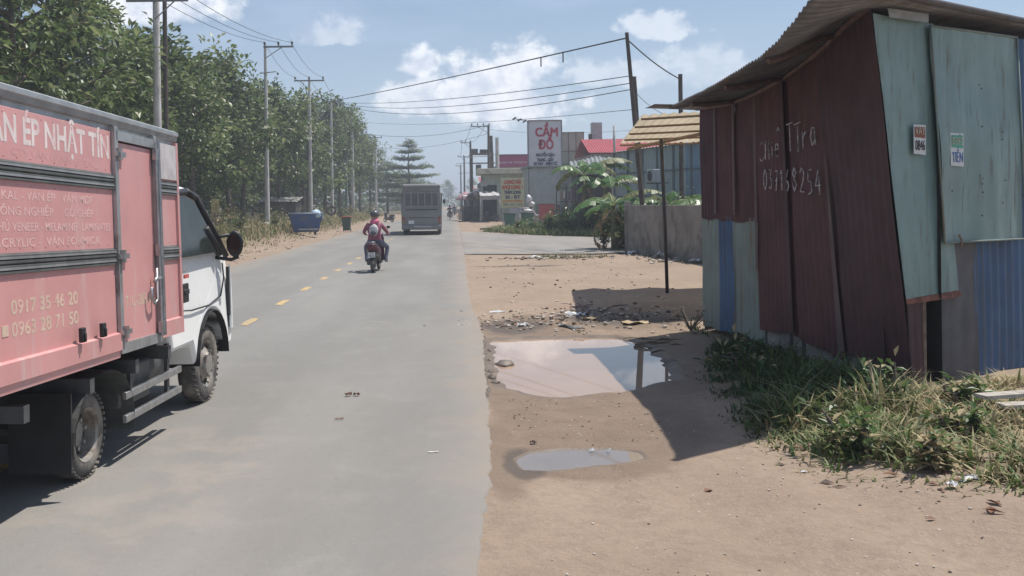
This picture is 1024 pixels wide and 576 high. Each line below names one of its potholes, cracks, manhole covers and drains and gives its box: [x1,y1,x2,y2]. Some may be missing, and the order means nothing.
pothole [512,448,649,471]
pothole [485,335,683,398]
